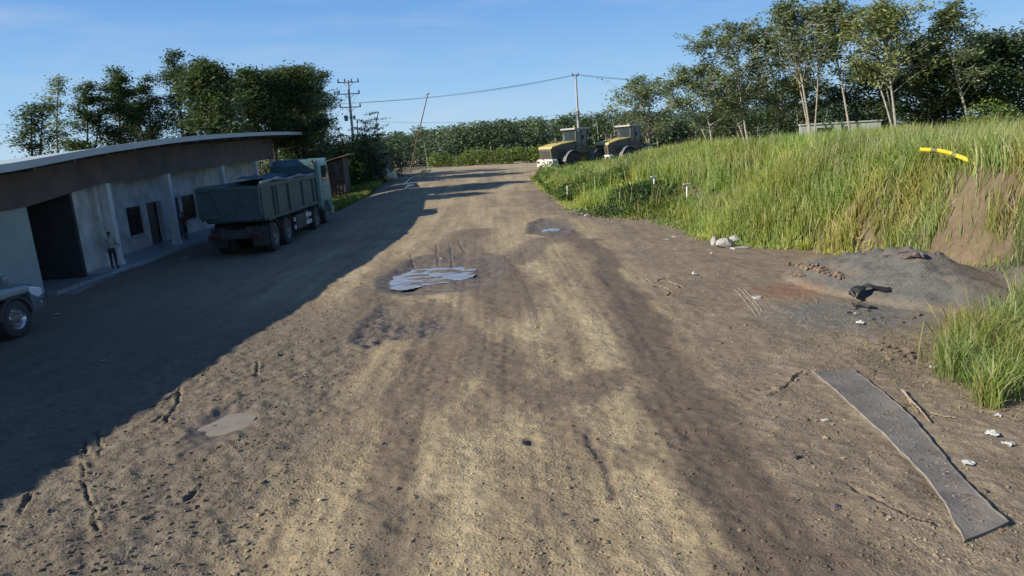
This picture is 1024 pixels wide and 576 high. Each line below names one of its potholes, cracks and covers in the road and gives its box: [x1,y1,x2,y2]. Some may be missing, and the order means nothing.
crack [143,386,183,424]
pothole [370,252,511,297]
crack [78,429,104,532]
crack [253,359,261,377]
crack [756,369,808,398]
pothole [521,436,540,446]
